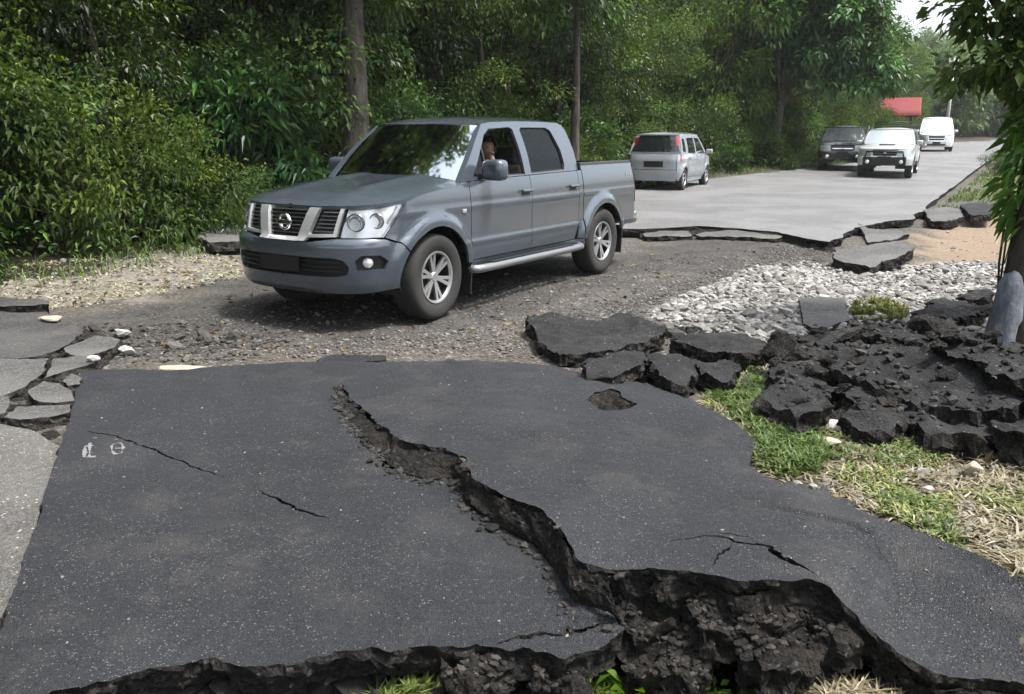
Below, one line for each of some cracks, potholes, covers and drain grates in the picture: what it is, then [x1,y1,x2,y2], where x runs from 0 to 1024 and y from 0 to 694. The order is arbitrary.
crack [106,434,325,518]
crack [714,543,804,568]
crack [340,388,618,645]
pothole [588,390,635,411]
